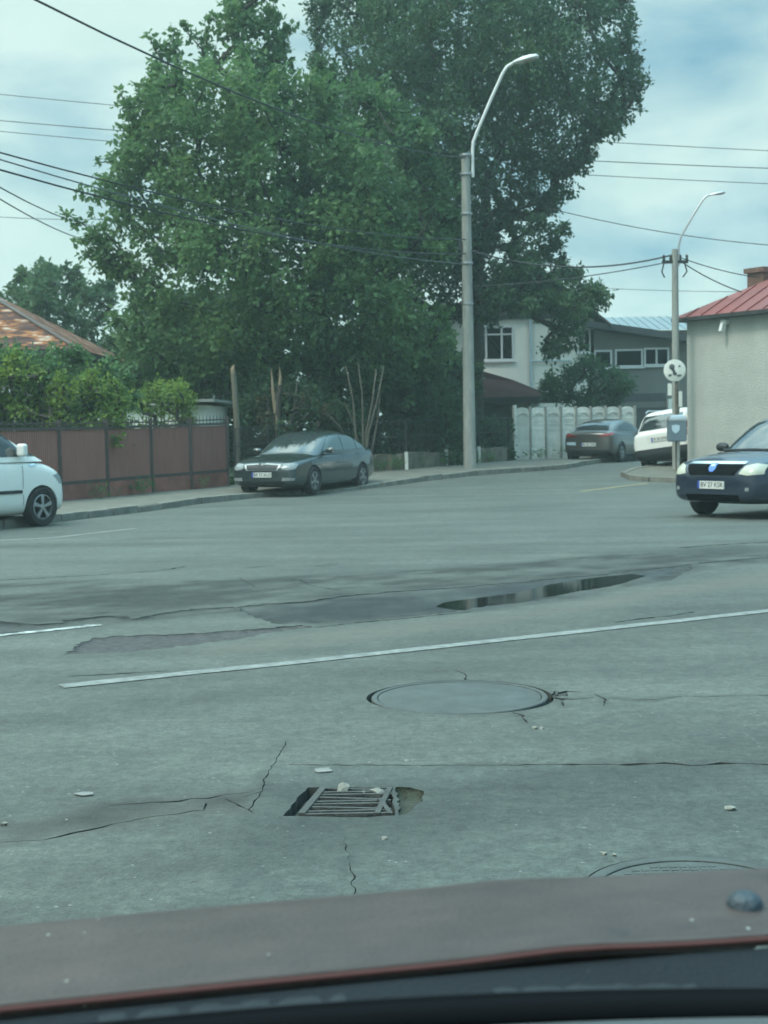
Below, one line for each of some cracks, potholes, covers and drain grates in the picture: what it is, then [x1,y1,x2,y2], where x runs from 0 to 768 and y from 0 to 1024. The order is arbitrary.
pothole [395,787,424,815]
crack [344,843,356,895]
crack [9,742,768,842]
manhole cover [588,856,768,877]
manhole cover [367,680,552,714]
drain grate [284,787,395,817]
